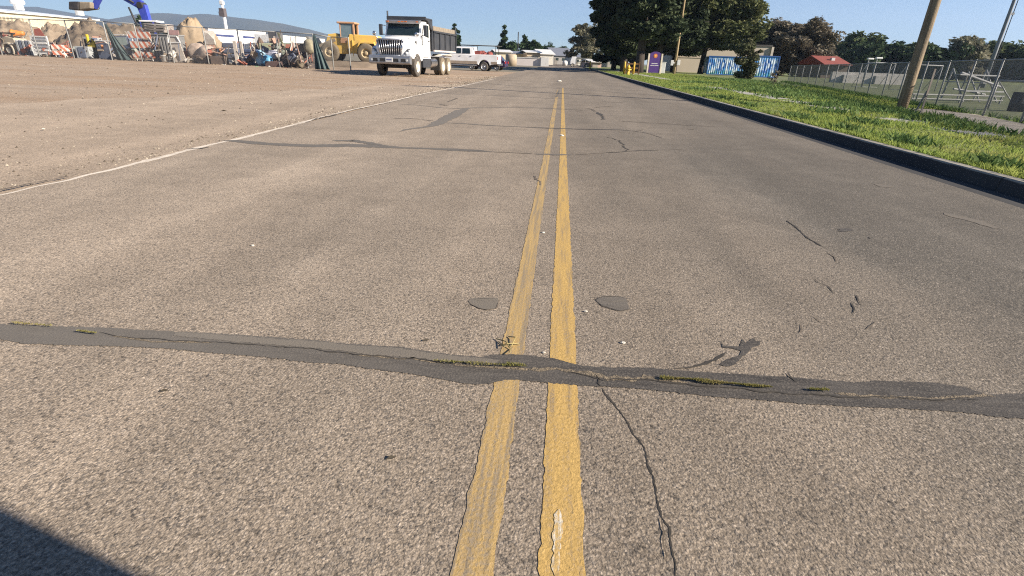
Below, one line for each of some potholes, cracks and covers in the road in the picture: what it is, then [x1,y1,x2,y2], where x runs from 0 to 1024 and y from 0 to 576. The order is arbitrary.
crack [786,220,837,262]
crack [101,332,995,576]
crack [818,282,875,329]
crack [577,121,695,155]
